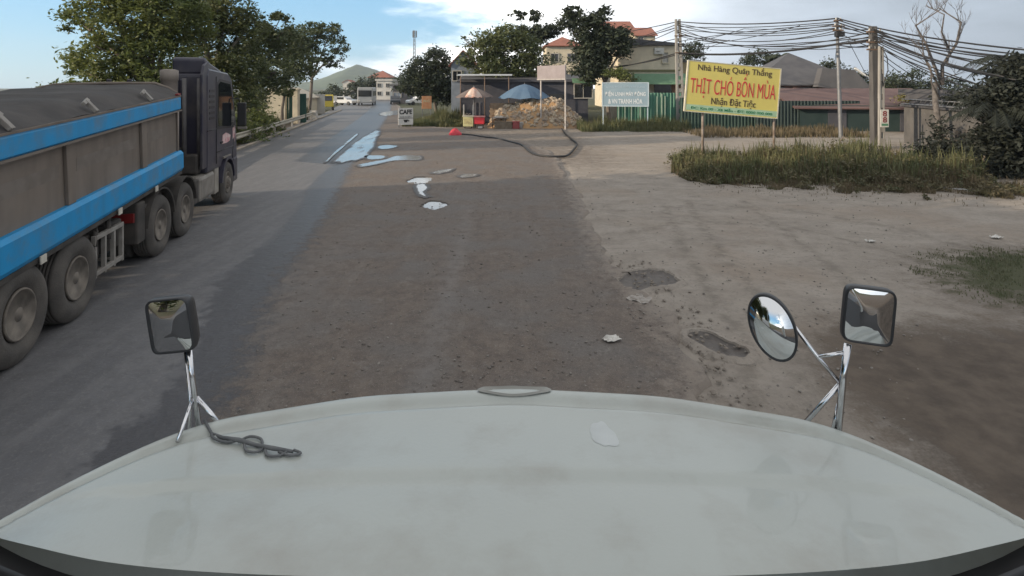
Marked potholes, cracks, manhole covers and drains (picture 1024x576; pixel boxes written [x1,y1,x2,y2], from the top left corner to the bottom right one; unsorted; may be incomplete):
pothole [617,267,688,296]
pothole [679,327,762,366]
